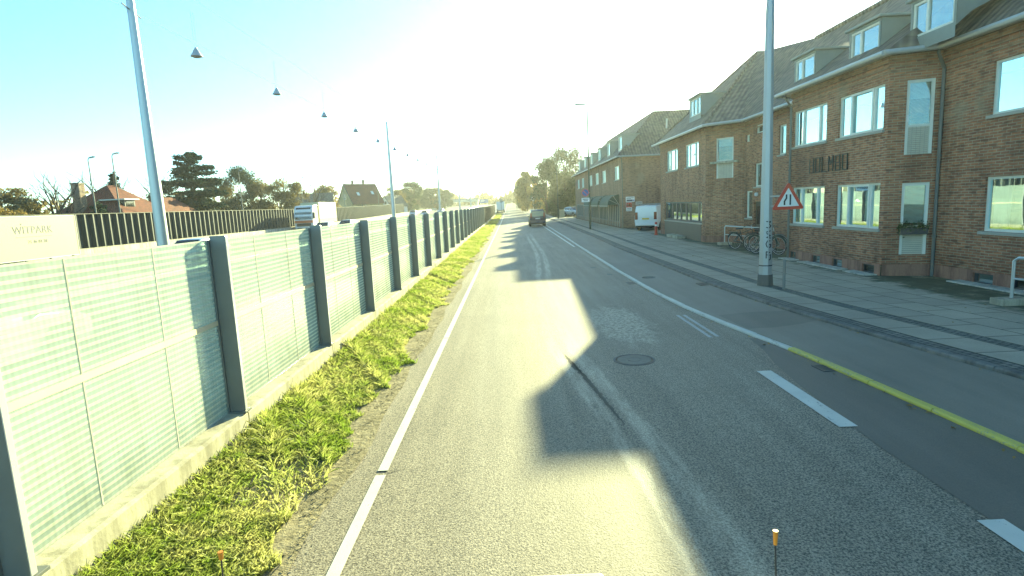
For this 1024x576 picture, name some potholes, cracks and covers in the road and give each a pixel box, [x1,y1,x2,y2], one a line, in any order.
manhole cover [613,354,655,366]
crack [565,355,624,423]
